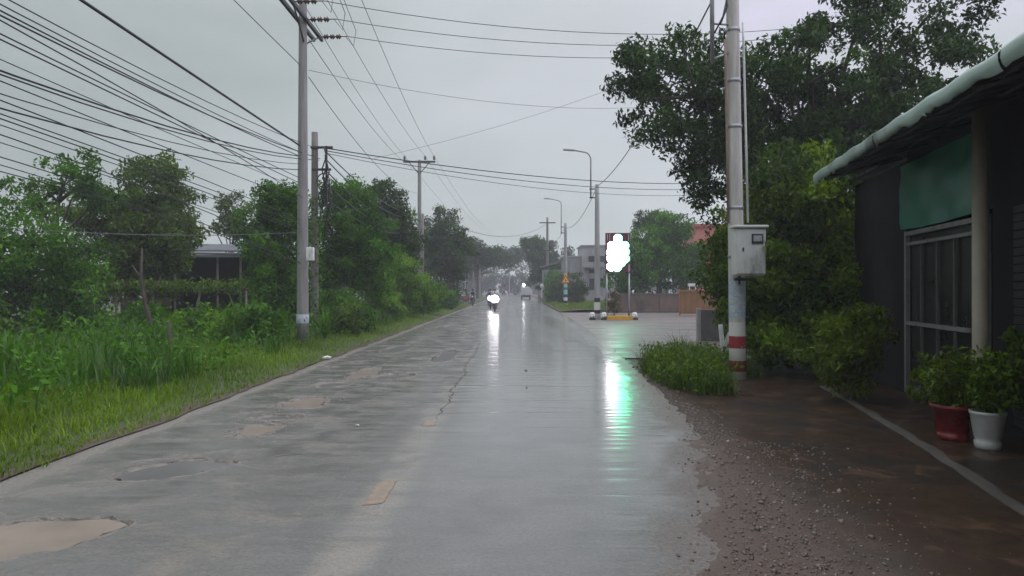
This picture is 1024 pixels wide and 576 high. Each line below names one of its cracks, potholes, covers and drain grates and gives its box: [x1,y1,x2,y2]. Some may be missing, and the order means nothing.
pothole [108,457,242,482]
pothole [0,515,138,563]
pothole [430,350,458,362]
crack [436,345,479,417]
